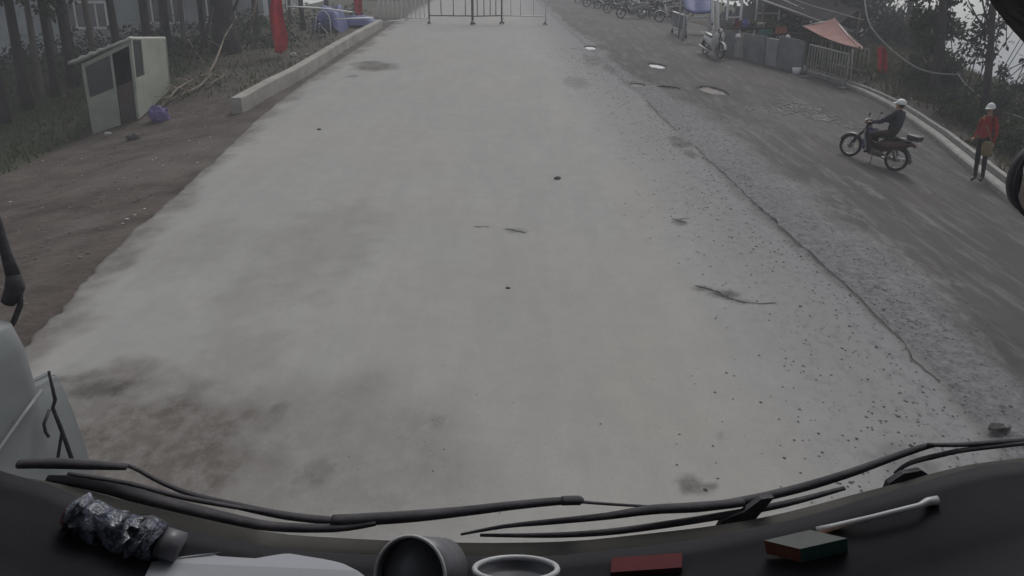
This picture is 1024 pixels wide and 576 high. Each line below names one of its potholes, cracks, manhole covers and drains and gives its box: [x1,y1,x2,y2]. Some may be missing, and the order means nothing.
crack [694,285,776,304]
